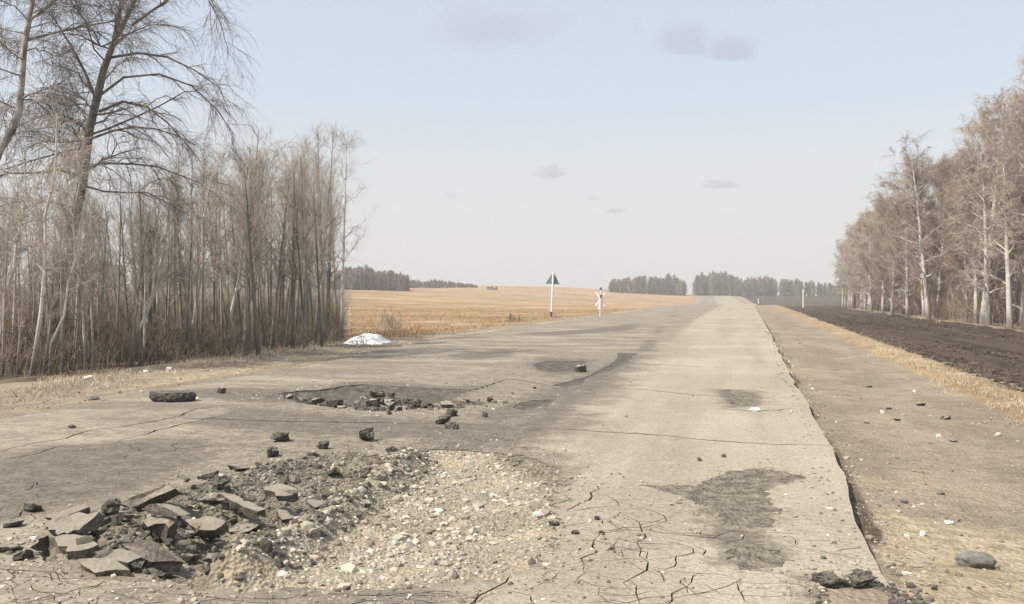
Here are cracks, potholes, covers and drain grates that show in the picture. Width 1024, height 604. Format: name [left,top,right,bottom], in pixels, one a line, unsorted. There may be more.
pothole [281,384,491,411]
